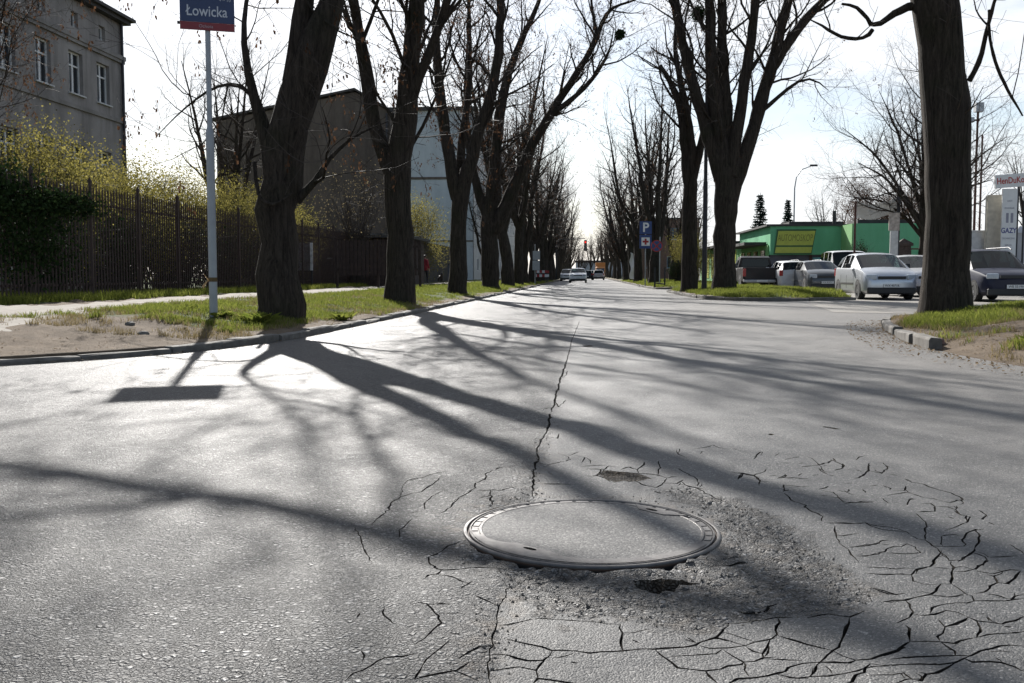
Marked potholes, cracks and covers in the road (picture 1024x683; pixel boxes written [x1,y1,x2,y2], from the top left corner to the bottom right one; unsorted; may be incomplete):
crack [345,445,1024,683]
manhole cover [463,499,721,573]
pothole [633,578,699,594]
pothole [598,470,651,482]
